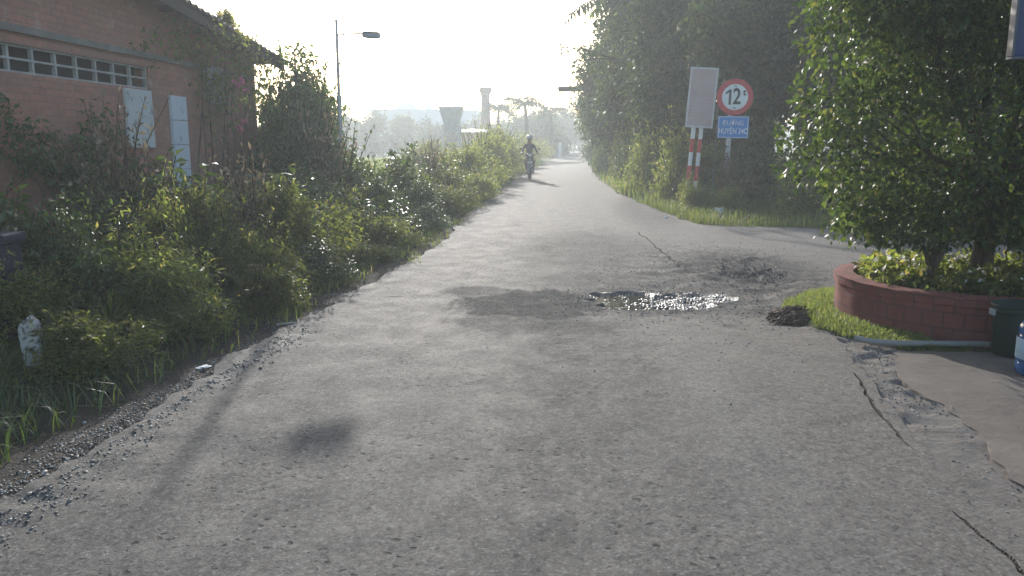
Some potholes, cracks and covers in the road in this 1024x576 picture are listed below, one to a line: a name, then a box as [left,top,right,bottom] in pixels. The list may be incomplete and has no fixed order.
pothole [584,291,739,310]
crack [952,511,1024,576]
crack [854,373,914,449]
crack [638,232,685,270]
pothole [720,258,805,286]
